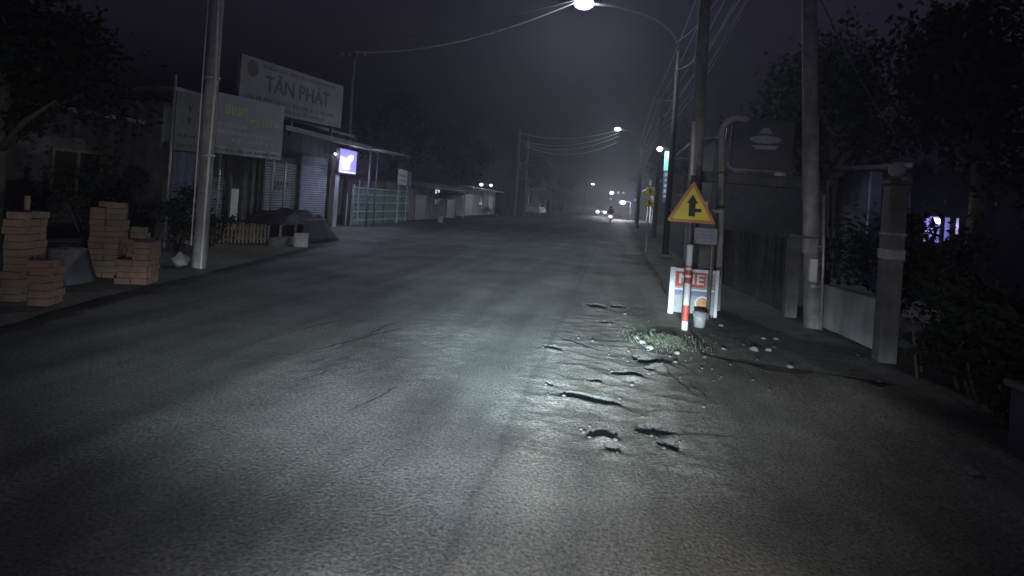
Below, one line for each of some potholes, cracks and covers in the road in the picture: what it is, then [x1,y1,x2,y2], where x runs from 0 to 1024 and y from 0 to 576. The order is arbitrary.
pothole [656,438,679,451]
pothole [586,427,614,438]
pothole [634,423,675,436]
pothole [603,441,622,453]
crack [350,387,396,410]
crack [663,363,708,398]
pothole [559,390,623,405]
crack [257,318,415,379]
pothole [631,354,659,364]
